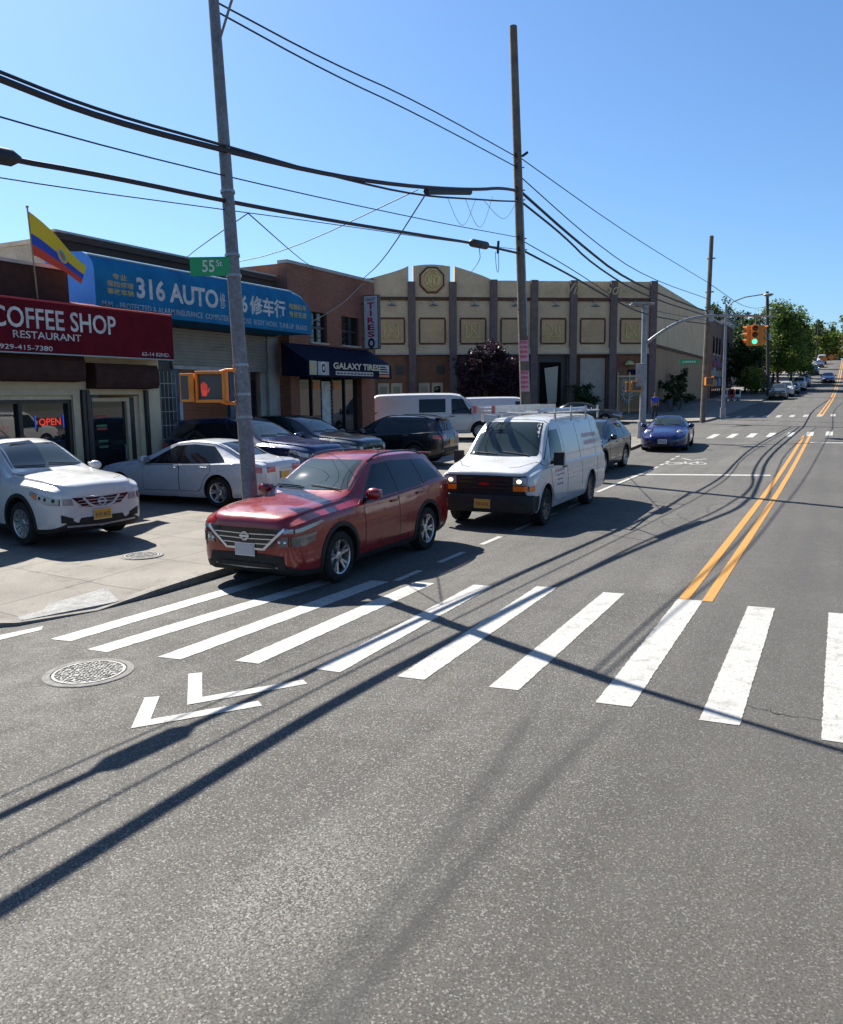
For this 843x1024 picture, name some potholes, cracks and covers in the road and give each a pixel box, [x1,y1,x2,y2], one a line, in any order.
manhole cover [42,658,135,688]
manhole cover [119,551,164,560]
